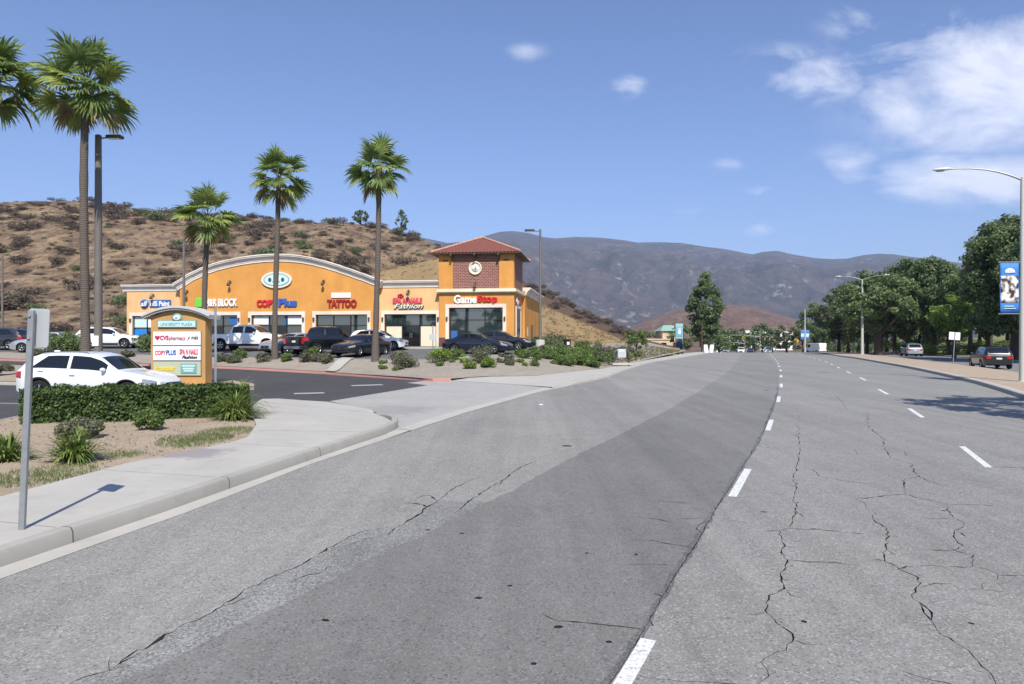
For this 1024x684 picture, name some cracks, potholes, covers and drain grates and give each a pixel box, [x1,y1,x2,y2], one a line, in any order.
crack [746,410,1021,684]
crack [72,461,535,682]
